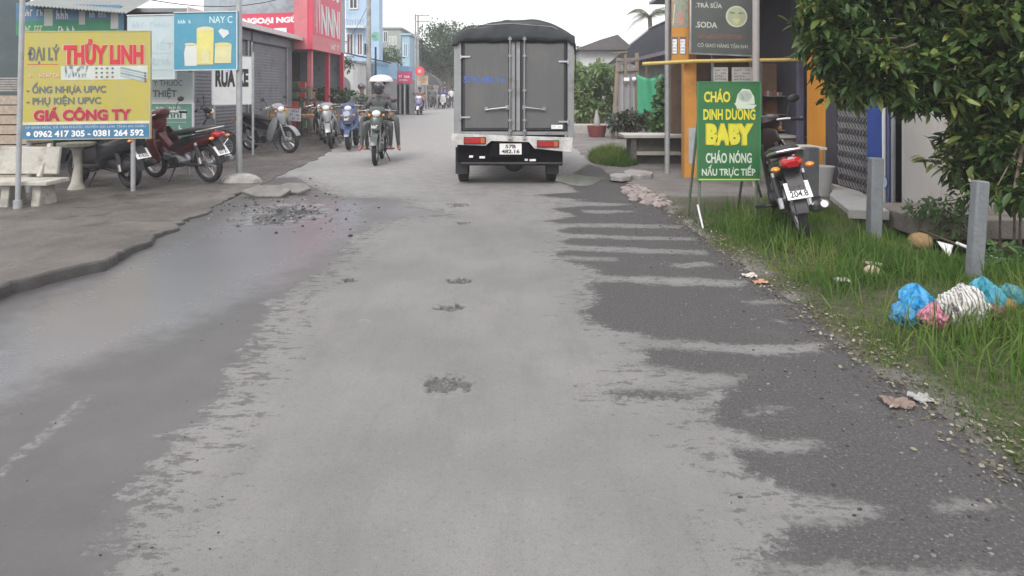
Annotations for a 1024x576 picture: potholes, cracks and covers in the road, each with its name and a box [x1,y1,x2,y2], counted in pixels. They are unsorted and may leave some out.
pothole [427,300,477,313]
pothole [440,276,477,285]
pothole [407,369,485,400]
pothole [210,200,350,230]
